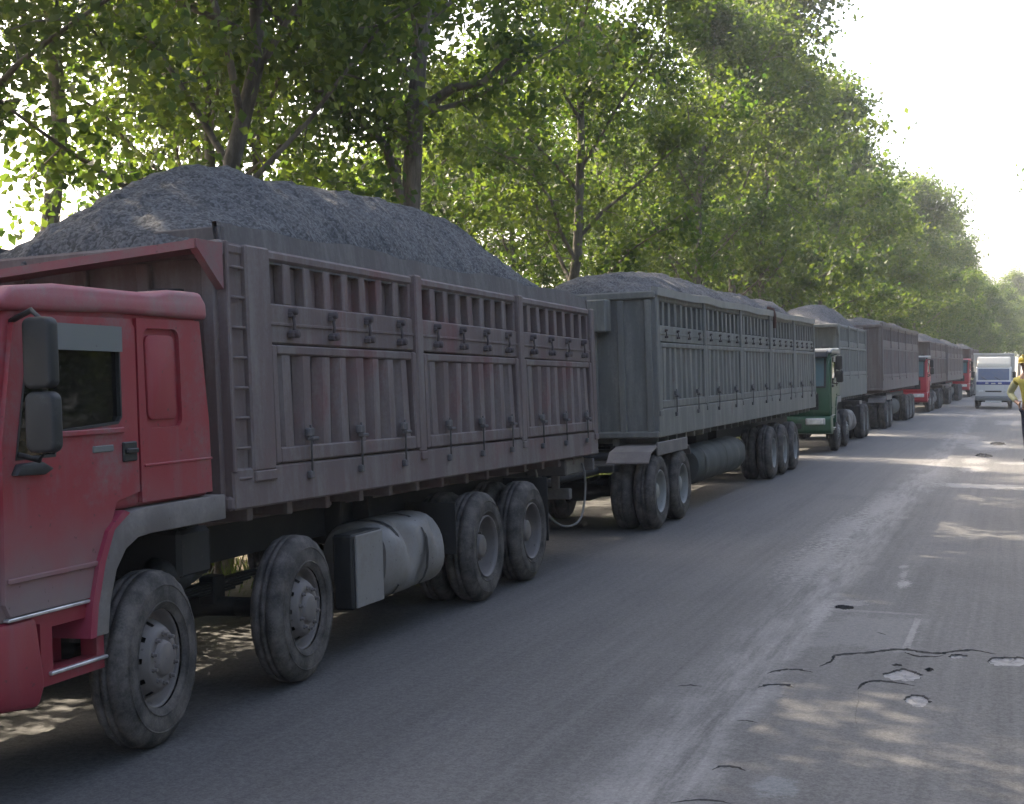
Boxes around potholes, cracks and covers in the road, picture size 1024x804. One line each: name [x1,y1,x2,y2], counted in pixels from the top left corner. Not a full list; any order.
pothole [903,694,932,707]
pothole [988,656,1024,666]
crack [758,632,993,725]
pothole [882,668,923,681]
